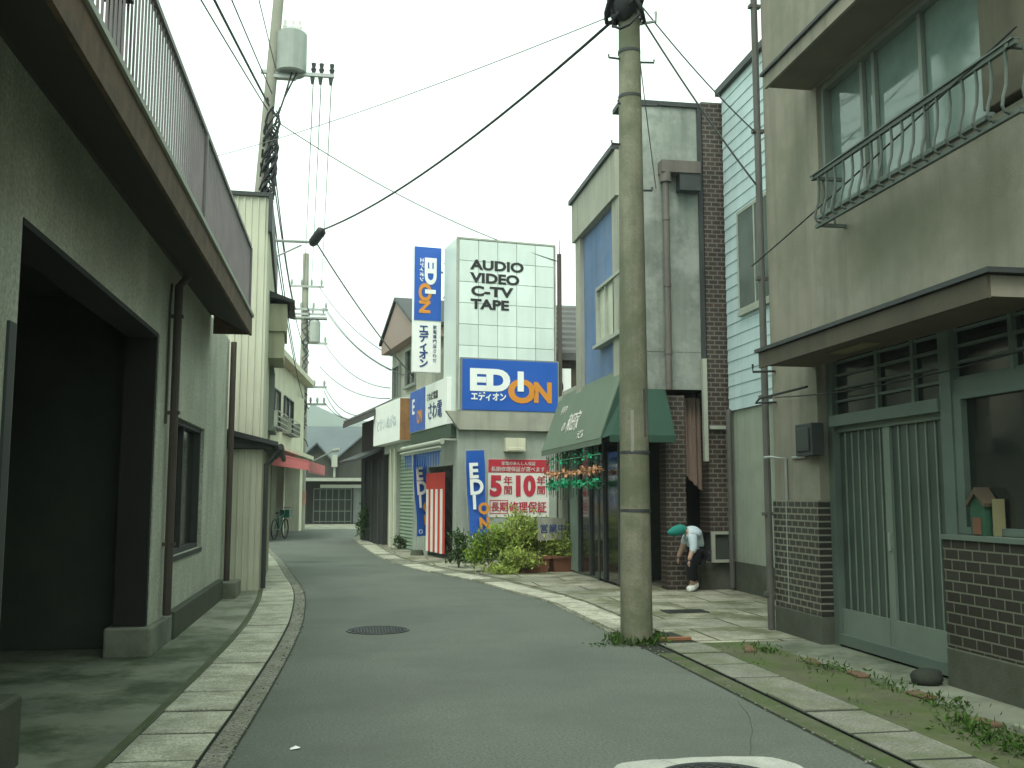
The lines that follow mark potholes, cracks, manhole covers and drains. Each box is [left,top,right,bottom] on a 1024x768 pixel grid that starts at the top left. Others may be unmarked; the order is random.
manhole cover [346,625,410,635]
manhole cover [614,756,803,768]
